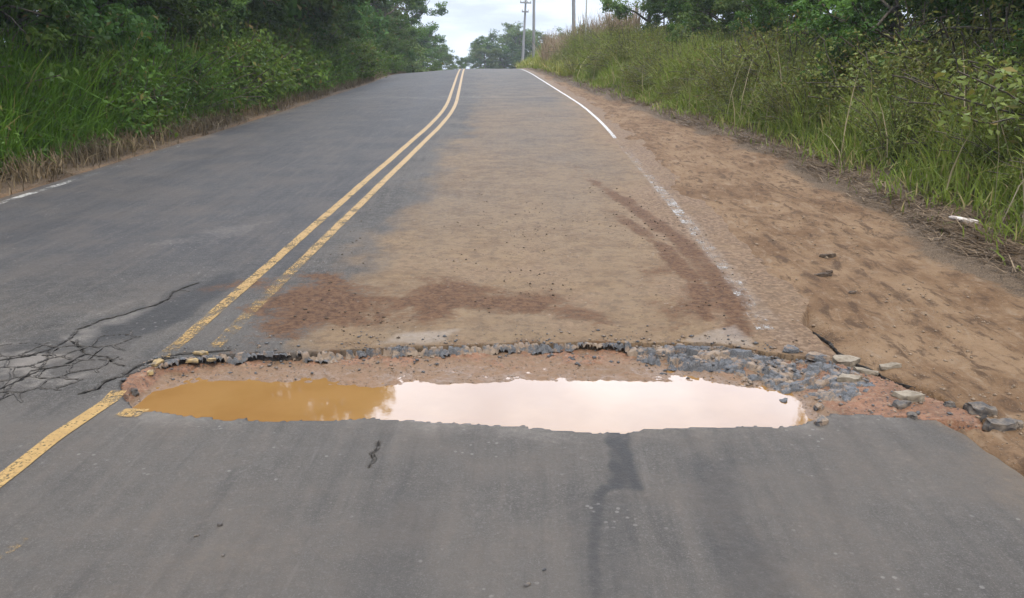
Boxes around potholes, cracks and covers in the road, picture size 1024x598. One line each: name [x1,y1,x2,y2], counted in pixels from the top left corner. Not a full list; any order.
pothole [121,342,984,432]
crack [0,283,231,403]
crack [369,440,380,468]
